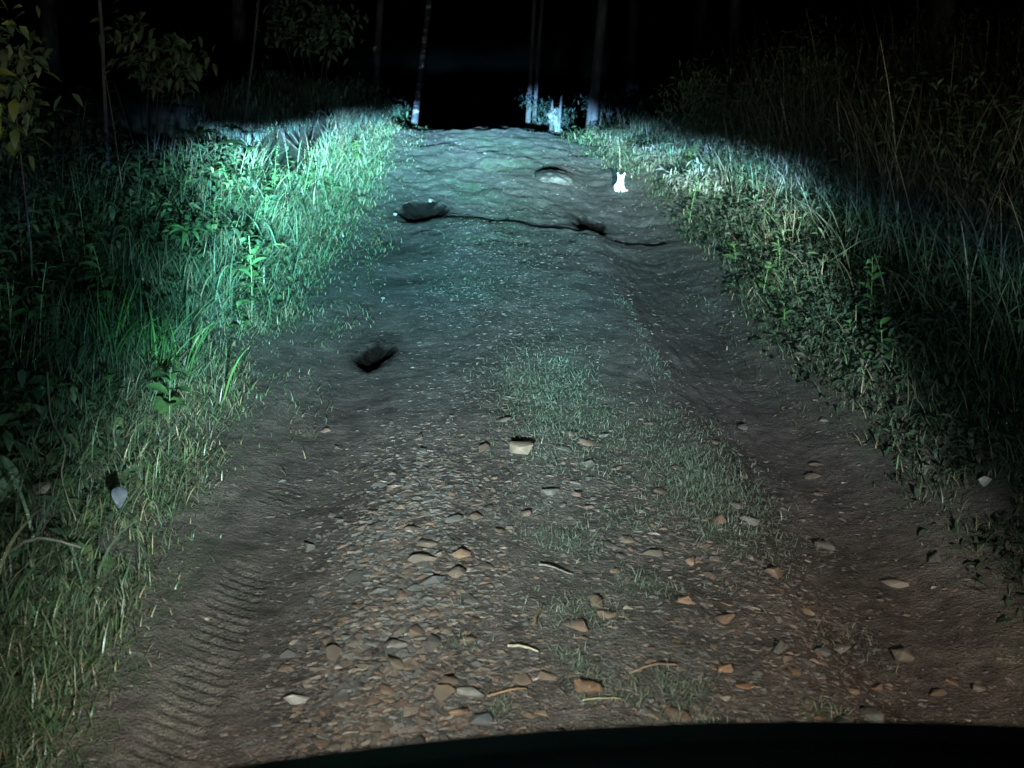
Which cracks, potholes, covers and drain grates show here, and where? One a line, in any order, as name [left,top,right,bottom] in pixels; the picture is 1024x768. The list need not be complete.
pothole [569,215,607,236]
crack [445,214,667,246]
pothole [392,199,452,223]
pothole [351,338,398,374]
